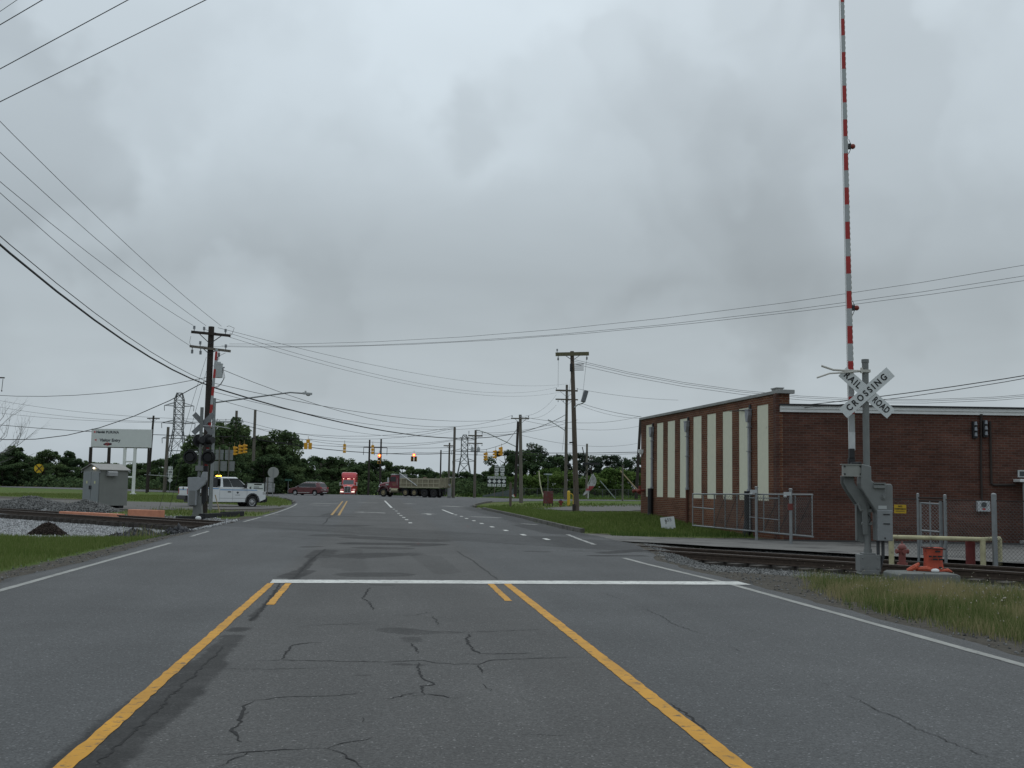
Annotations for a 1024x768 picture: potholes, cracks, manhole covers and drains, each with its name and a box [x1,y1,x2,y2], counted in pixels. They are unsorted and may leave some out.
crack [92,588,567,765]
crack [604,593,1007,762]
